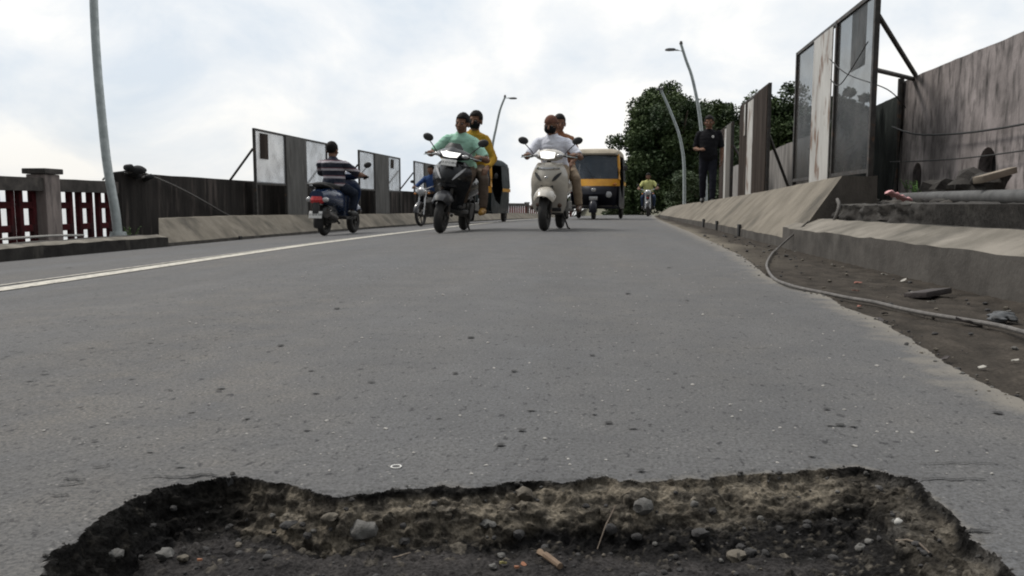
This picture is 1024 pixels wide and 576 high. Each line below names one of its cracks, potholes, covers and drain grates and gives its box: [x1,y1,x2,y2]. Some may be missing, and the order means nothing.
crack [914,461,987,483]
pothole [40,466,1015,576]
